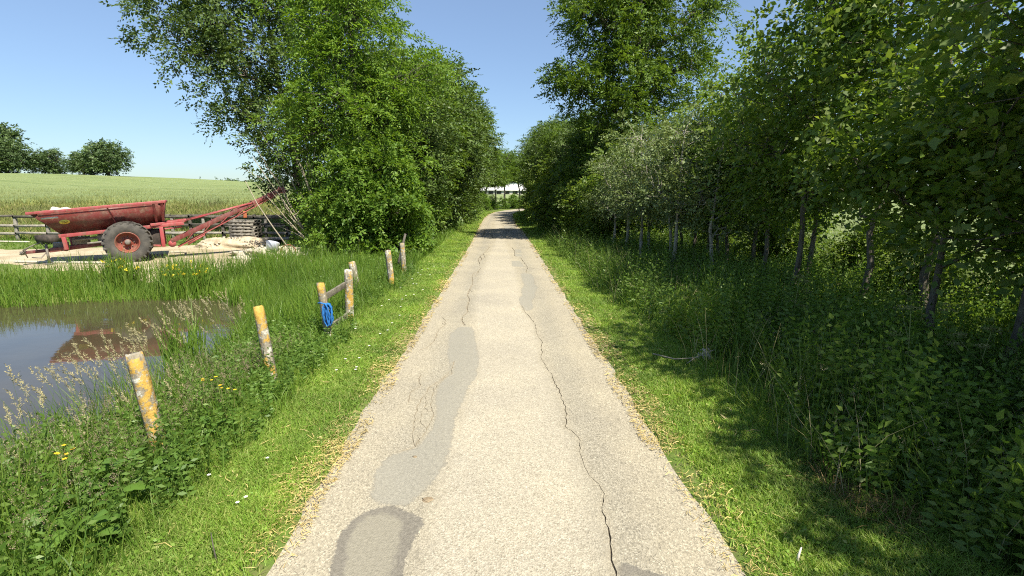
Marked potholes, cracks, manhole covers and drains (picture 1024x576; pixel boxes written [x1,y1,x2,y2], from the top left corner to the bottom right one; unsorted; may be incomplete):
crack [522,306,617,576]
crack [420,230,493,350]
crack [395,362,454,453]
